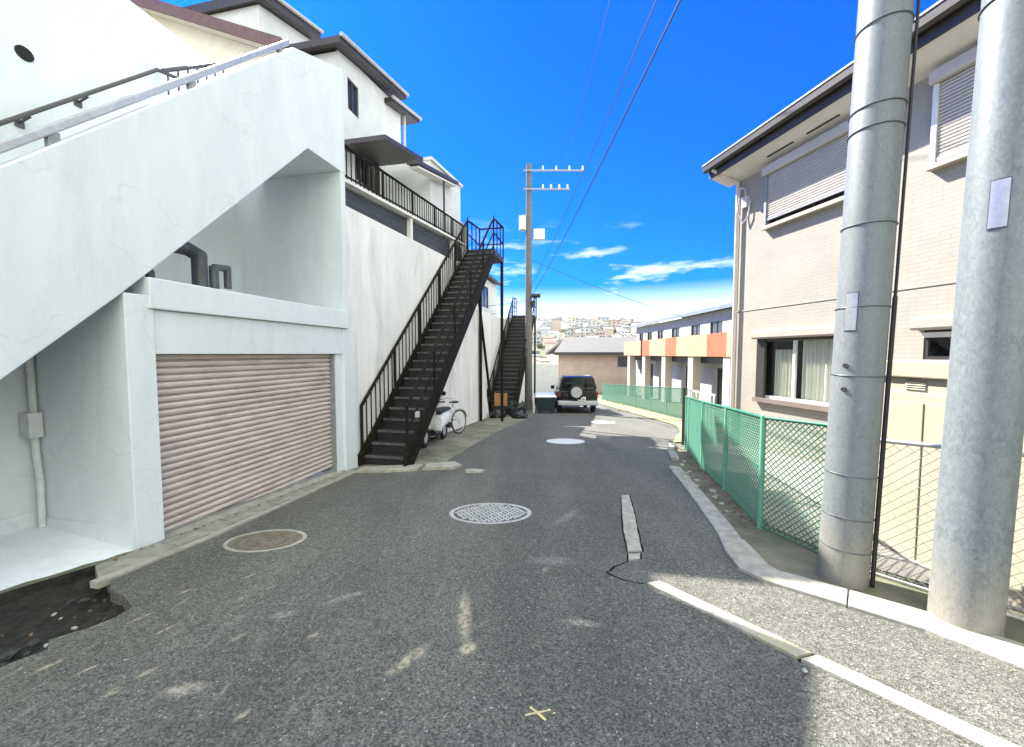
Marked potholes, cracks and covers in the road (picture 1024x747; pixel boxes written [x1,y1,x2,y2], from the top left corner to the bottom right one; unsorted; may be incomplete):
pothole [0,565,126,667]
manhole cover [223,529,307,552]
manhole cover [449,503,532,524]
